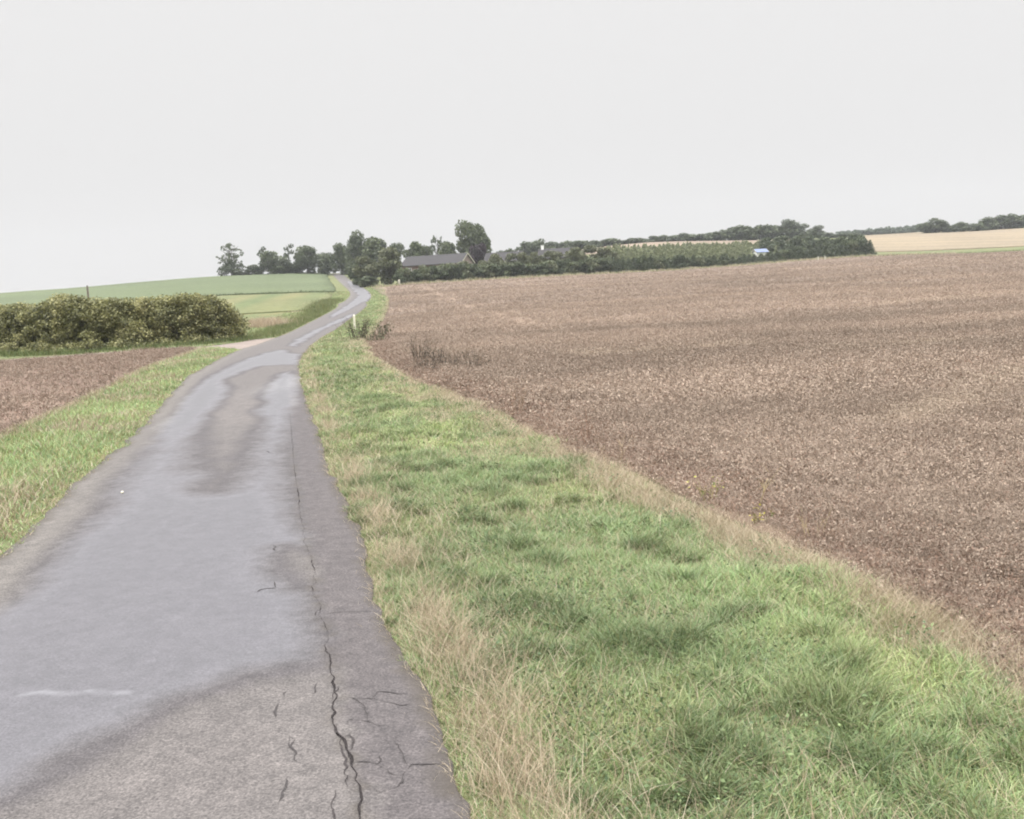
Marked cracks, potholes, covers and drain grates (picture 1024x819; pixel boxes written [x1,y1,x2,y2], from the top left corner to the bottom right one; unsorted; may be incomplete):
crack [290,419,439,819]
